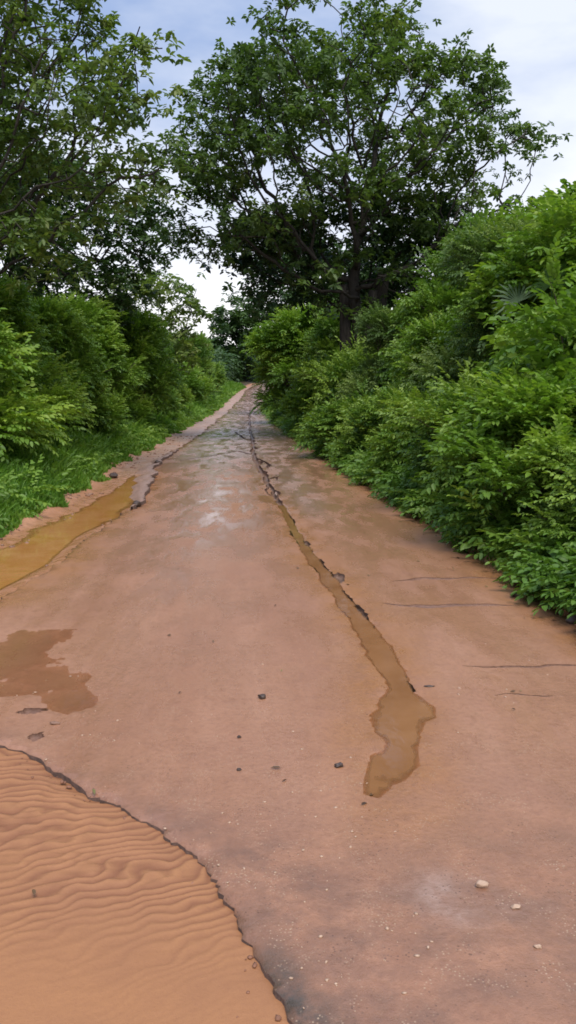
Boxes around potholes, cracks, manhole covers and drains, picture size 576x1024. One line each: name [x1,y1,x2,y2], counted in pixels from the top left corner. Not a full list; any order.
crack [181,410,518,692]
